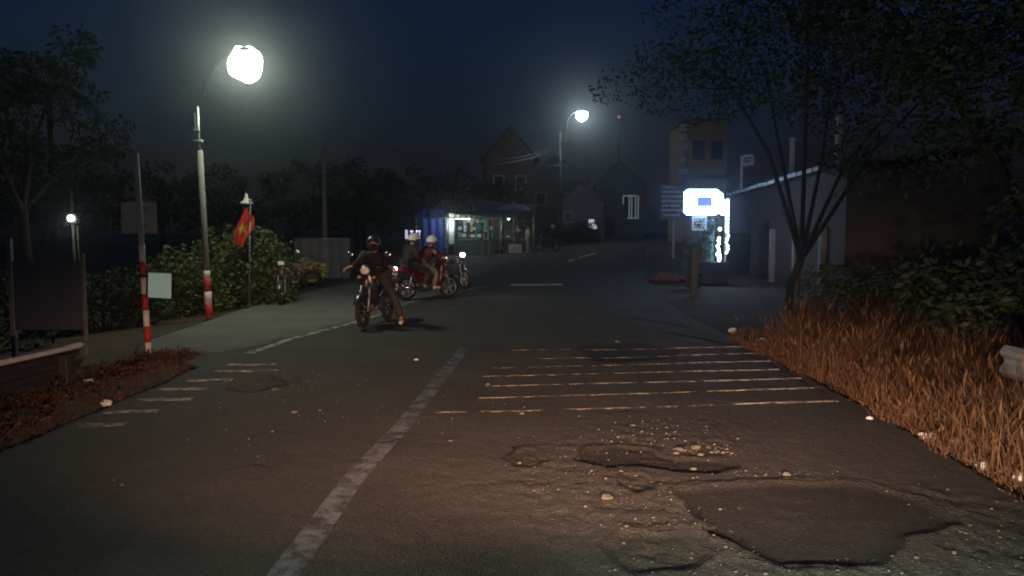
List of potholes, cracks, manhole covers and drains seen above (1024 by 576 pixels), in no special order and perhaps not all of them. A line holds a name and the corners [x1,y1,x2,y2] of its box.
crack [588,502,692,527]
pothole [509,446,548,471]
crack [666,477,807,491]
pothole [572,444,742,473]
pothole [669,480,964,566]
pothole [617,471,662,492]
